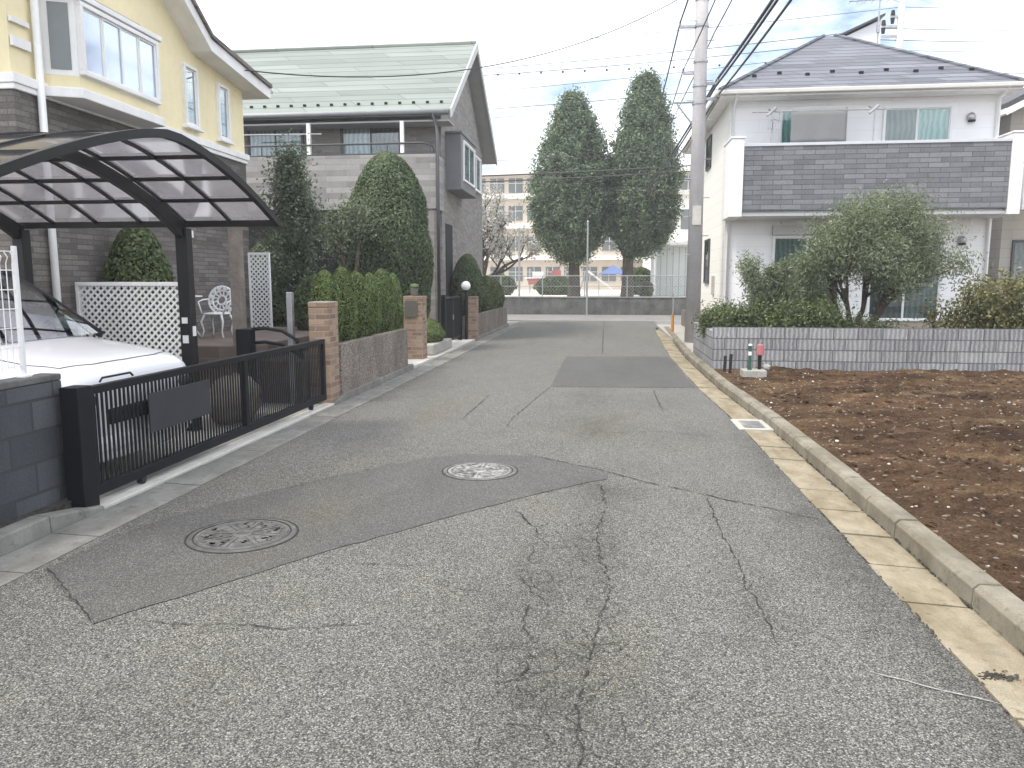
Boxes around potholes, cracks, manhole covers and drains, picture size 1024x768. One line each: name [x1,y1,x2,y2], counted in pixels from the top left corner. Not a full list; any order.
crack [472,485,628,768]
drain grate [730,419,774,432]
manhole cover [184,518,299,553]
manhole cover [442,462,518,480]
crack [148,620,363,629]
crack [523,453,820,644]
